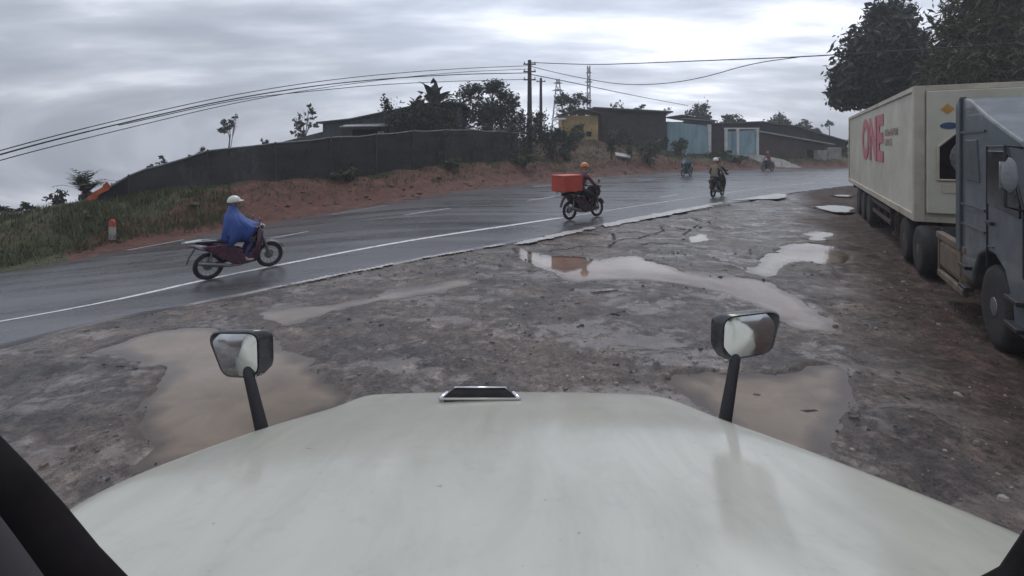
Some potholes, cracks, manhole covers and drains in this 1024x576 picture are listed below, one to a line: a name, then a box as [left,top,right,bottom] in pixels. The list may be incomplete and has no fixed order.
crack [537,217,730,253]
pothole [655,357,870,464]
pothole [246,276,485,331]
pothole [500,245,847,336]
pothole [739,242,858,277]
pothole [82,322,376,476]
pothole [680,233,714,243]
pothole [797,230,840,241]
